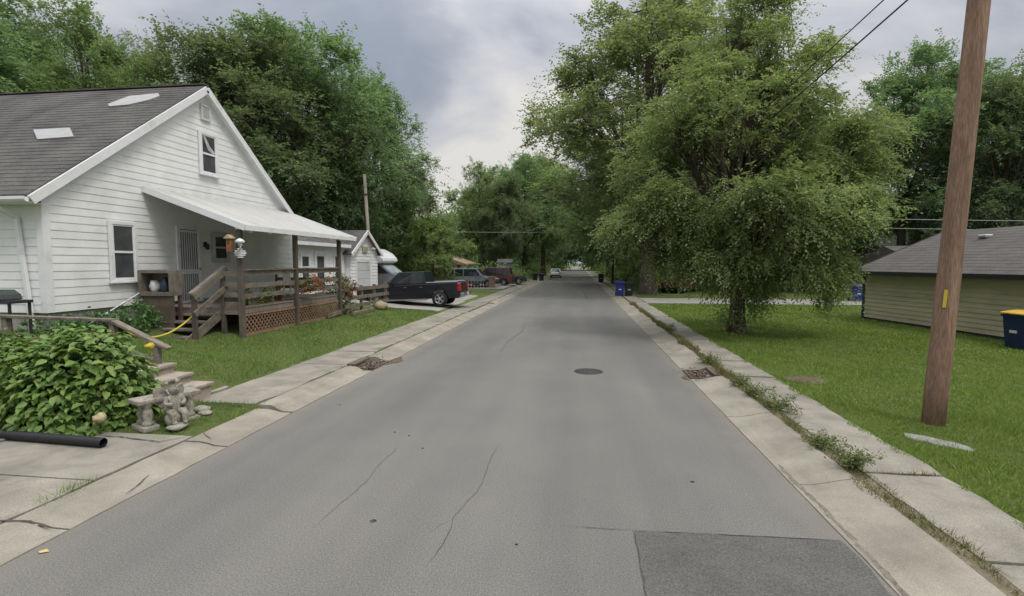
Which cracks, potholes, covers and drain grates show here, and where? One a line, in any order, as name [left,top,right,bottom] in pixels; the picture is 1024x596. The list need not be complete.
crack [430,446,498,560]
drain grate [673,367,723,381]
crack [0,520,57,530]
drain grate [347,356,392,371]
